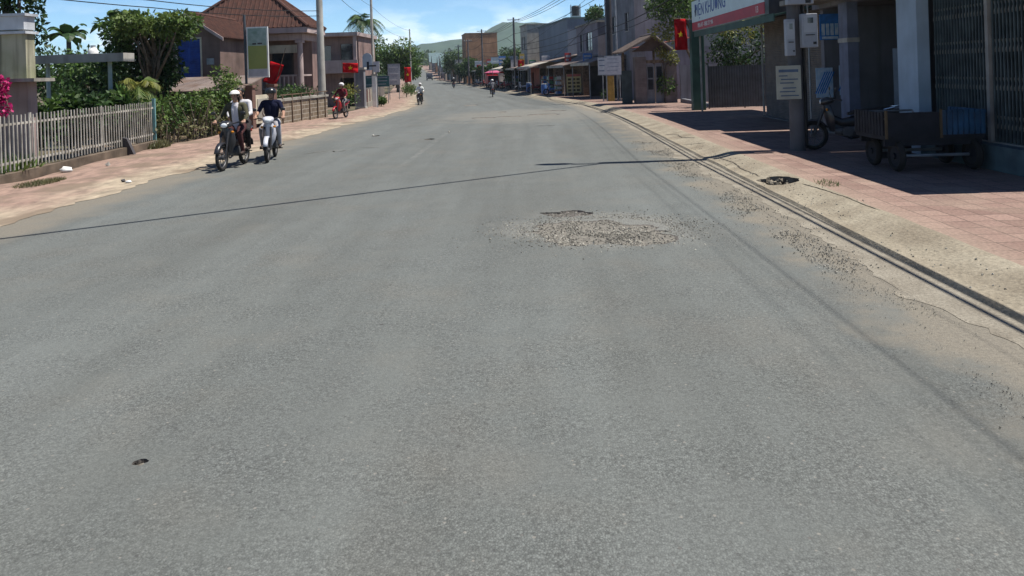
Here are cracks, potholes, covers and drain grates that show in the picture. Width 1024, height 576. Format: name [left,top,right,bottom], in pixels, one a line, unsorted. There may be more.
pothole [524,219,679,247]
pothole [756,176,799,185]
